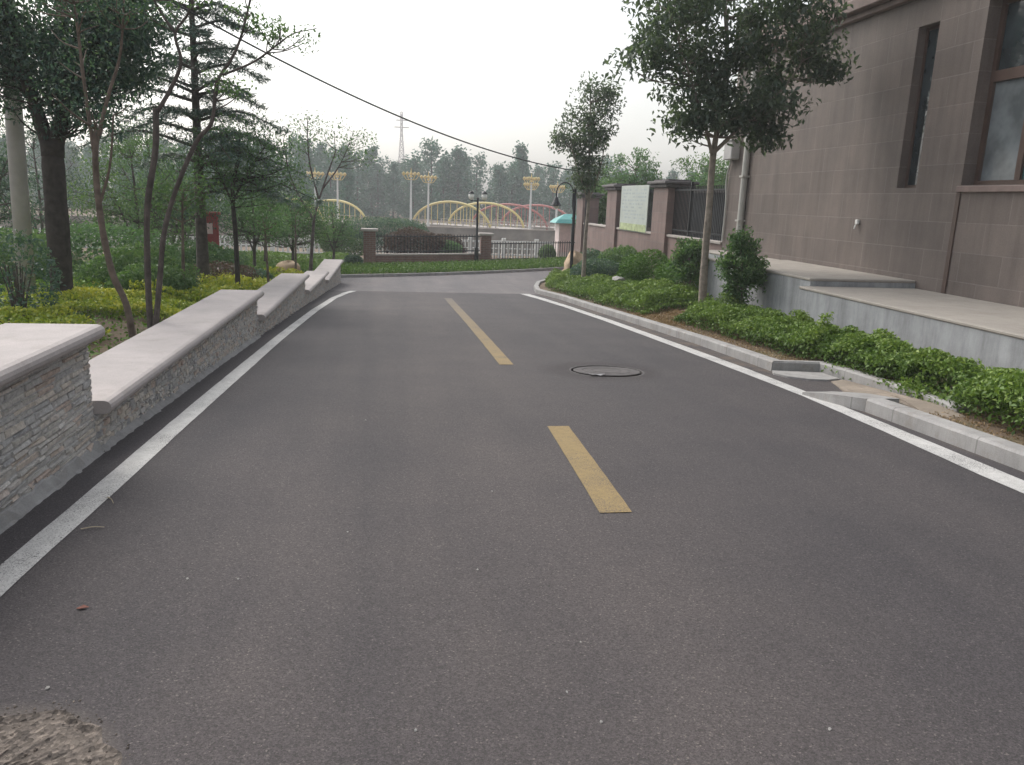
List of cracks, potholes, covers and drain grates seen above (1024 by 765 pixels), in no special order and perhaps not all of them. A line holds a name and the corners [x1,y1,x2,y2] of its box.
manhole cover [569,365,645,377]
